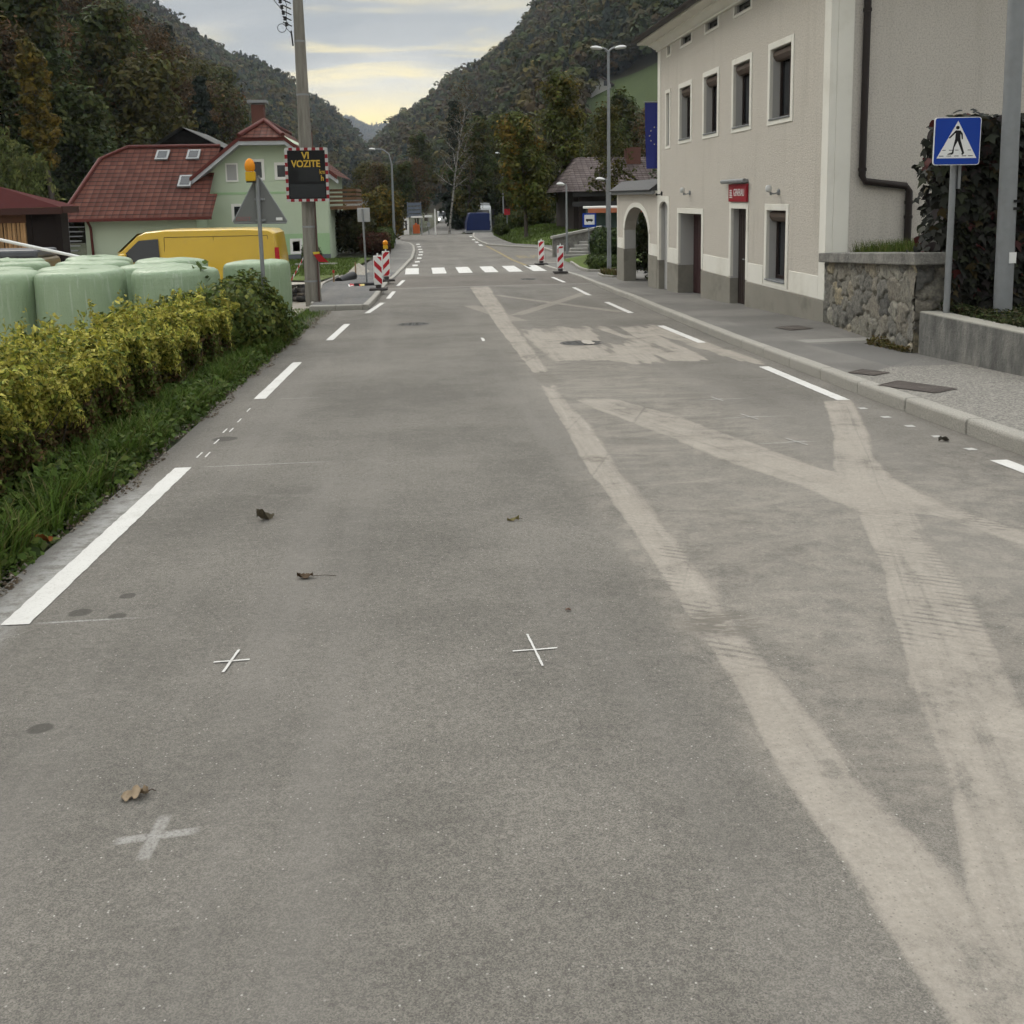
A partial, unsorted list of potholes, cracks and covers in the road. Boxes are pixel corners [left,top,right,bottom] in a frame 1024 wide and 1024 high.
utility cover [879,380,958,393]
